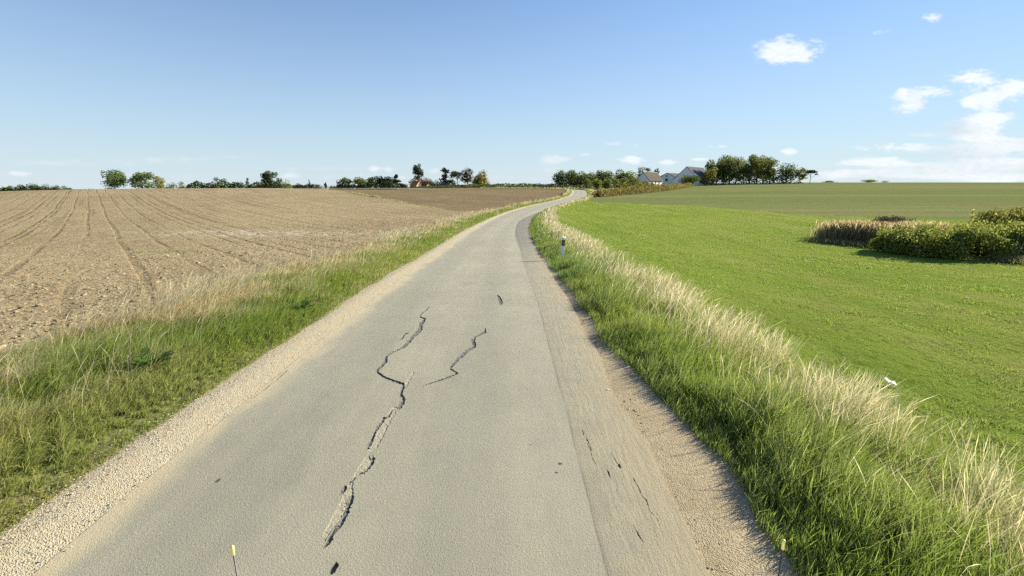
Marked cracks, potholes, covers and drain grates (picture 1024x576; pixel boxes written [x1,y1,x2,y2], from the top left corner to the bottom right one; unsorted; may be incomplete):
crack [322,307,487,549]
crack [582,430,660,543]
